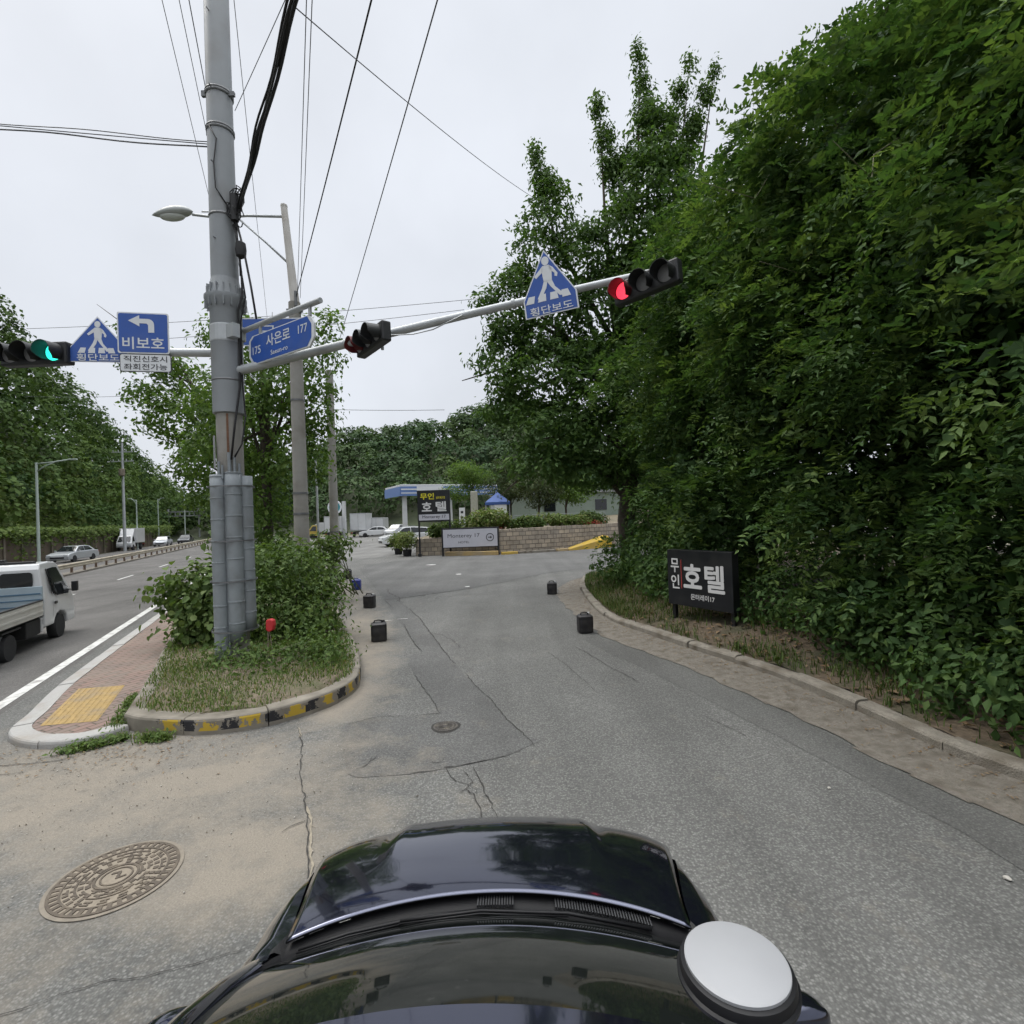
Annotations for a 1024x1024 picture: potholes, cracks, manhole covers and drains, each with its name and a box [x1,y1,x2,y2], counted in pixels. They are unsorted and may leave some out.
crack [282,727,315,879]
manhole cover [431,721,461,733]
manhole cover [39,840,184,922]
crack [432,761,498,818]
